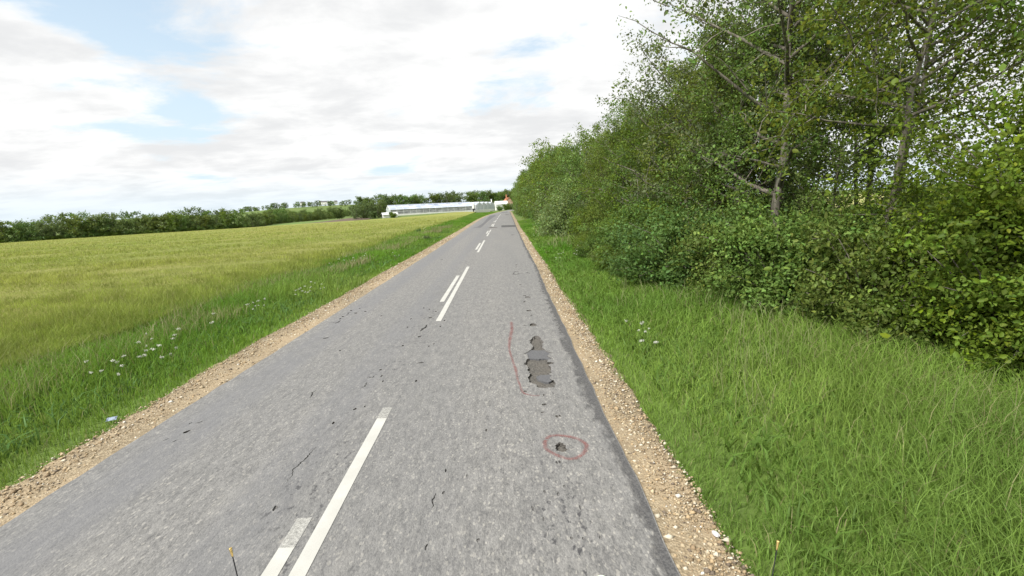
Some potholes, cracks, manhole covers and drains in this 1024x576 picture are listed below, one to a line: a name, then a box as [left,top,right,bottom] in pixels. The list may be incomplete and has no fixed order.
pothole [524,336,556,388]
